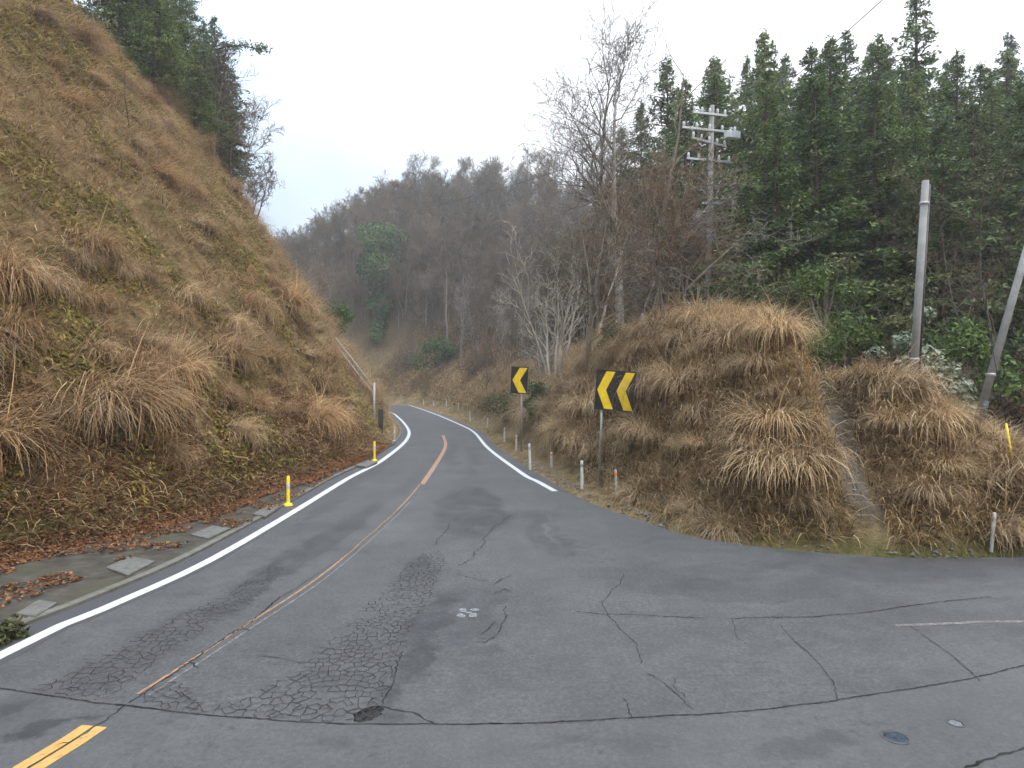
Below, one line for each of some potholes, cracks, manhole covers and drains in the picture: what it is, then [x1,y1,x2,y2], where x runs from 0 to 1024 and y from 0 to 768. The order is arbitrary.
crack [601,574,692,708]
crack [458,515,512,643]
crack [780,625,838,699]
manhole cover [945,718,966,728]
crack [27,511,396,768]
pothole [353,705,384,723]
crack [213,551,448,723]
manhole cover [881,730,911,745]
